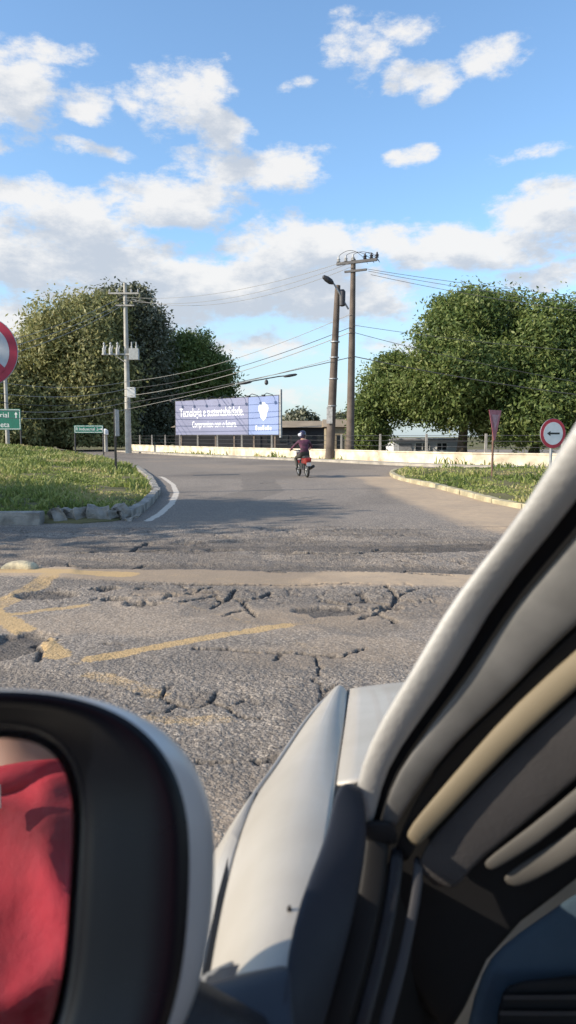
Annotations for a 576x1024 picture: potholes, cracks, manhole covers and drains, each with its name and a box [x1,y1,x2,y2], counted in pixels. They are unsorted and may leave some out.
crack [298,570,454,624]
crack [191,647,366,702]
crack [137,687,262,720]
pothole [125,600,169,608]
pothole [289,605,378,618]
crack [178,587,274,618]
pothole [0,630,55,661]
